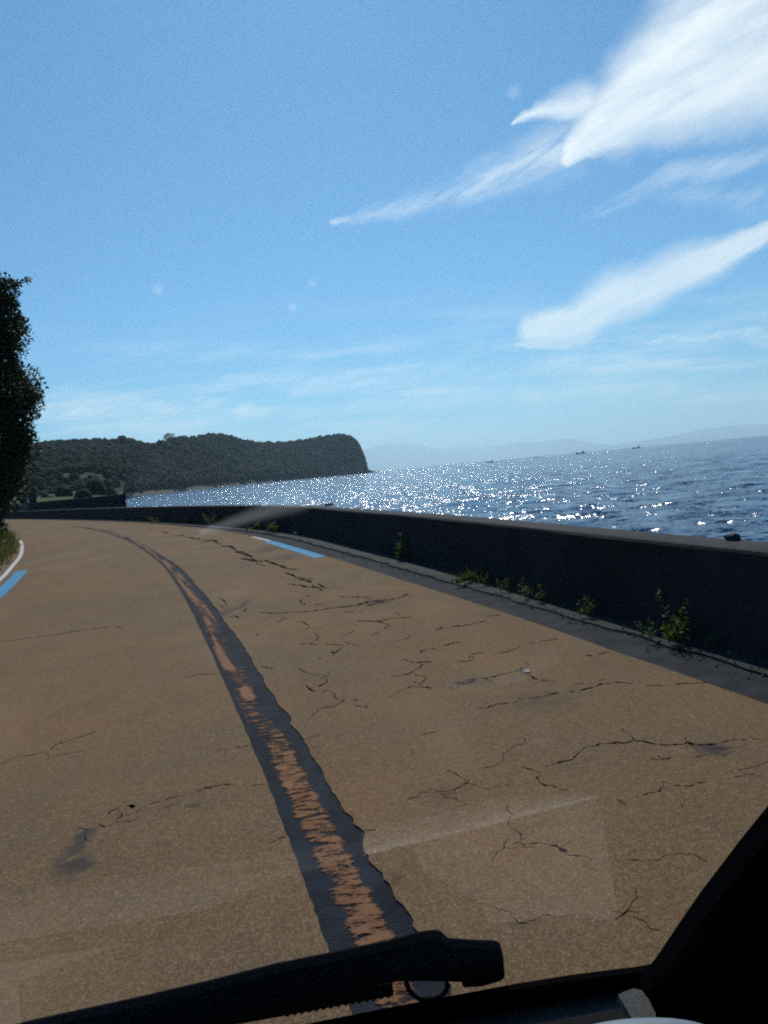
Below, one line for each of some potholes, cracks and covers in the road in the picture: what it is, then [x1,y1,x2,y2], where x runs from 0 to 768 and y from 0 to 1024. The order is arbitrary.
crack [481,903,576,924]
crack [626,853,708,863]
crack [491,804,596,871]
crack [612,886,661,931]
crack [407,728,768,808]
crack [78,784,262,842]
crack [163,532,708,784]
